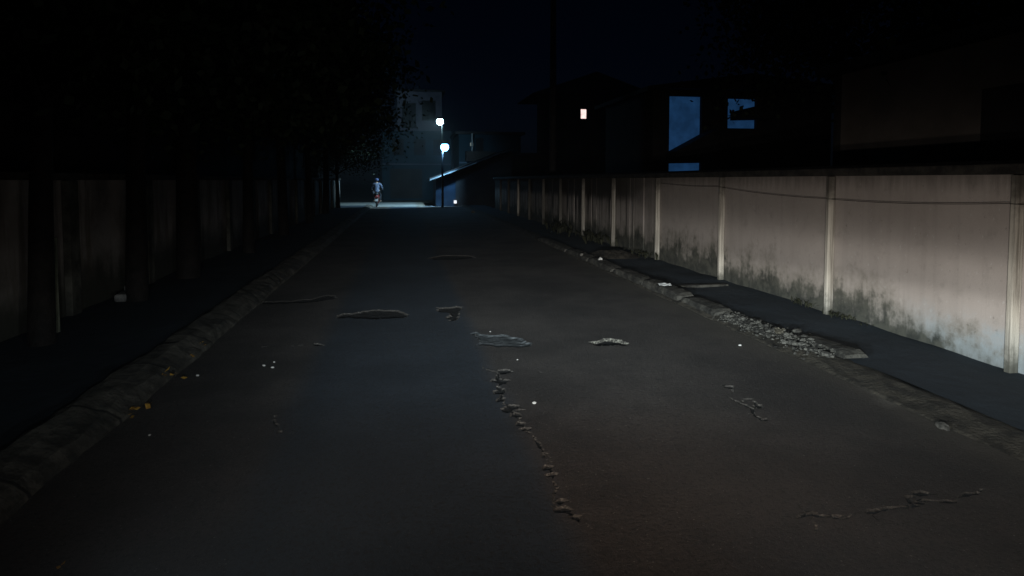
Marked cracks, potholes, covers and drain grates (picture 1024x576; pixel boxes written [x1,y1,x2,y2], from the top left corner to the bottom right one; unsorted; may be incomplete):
pothole [437,306,462,321]
crack [781,488,999,534]
crack [482,359,609,523]
pothole [589,338,629,346]
pothole [336,309,409,320]
crack [715,382,769,421]
